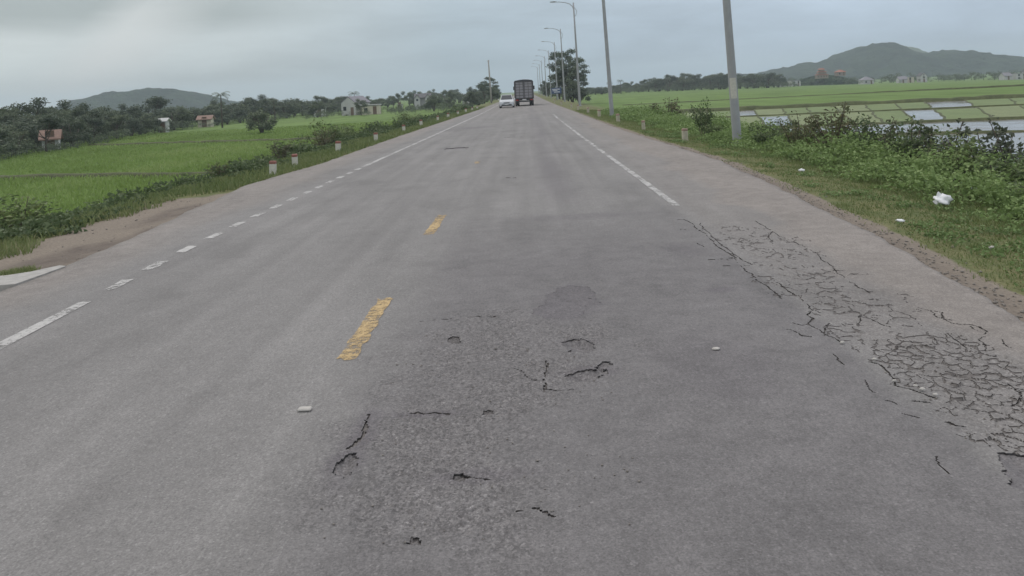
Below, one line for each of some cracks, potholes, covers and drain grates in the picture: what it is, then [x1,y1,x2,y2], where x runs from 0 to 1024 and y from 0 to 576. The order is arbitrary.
crack [515,507,556,517]
crack [514,360,574,392]
crack [346,414,371,450]
crack [678,219,1024,455]
